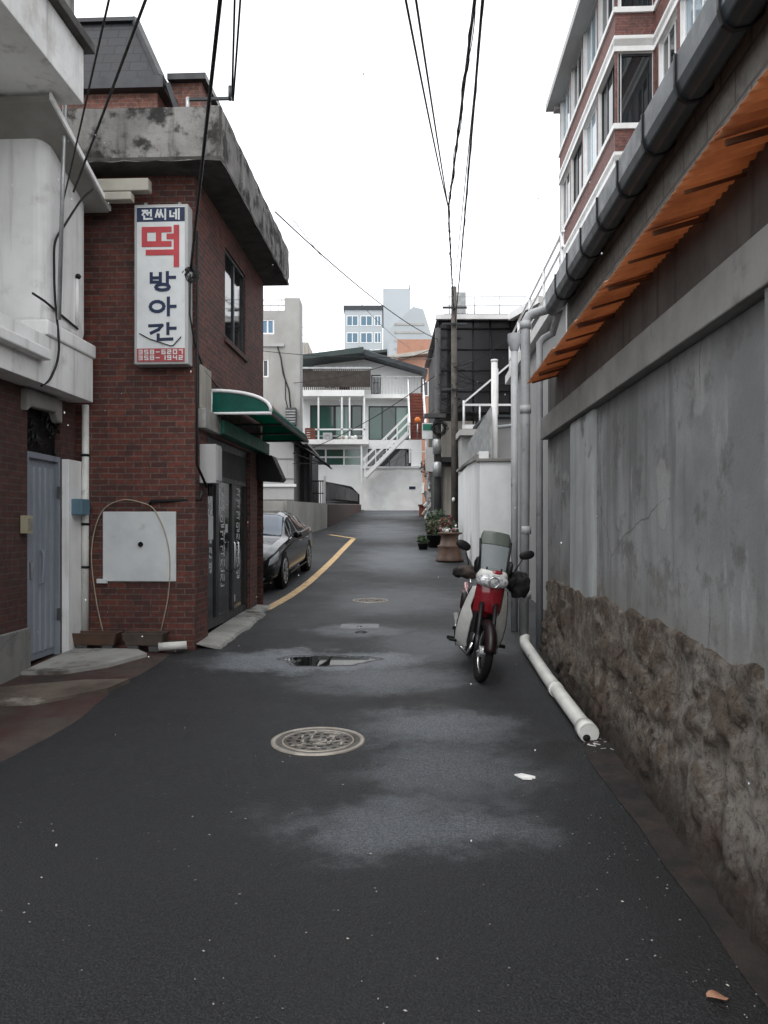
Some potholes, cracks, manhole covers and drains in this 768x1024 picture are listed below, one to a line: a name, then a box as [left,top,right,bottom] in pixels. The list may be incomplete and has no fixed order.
manhole cover [271,727,365,756]
pothole [277,654,384,666]
